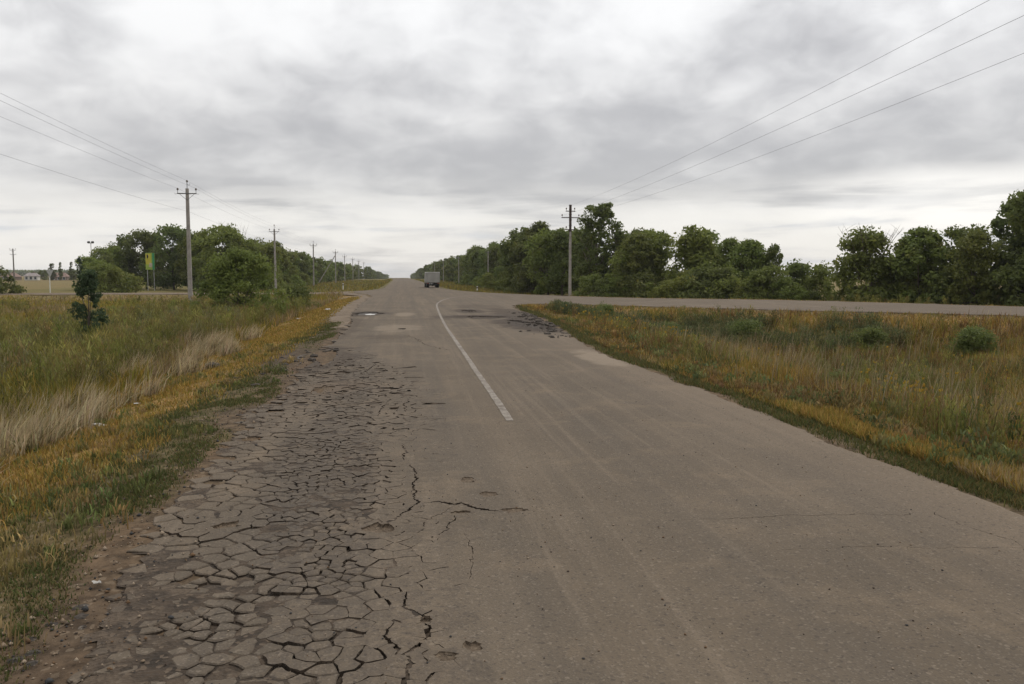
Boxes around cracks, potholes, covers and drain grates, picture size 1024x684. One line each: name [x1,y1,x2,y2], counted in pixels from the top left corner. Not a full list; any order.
pothole [462,640,483,654]
crack [684,512,1024,553]
pothole [434,651,458,661]
crack [67,347,498,684]
pothole [507,320,557,330]
pothole [361,522,395,536]
